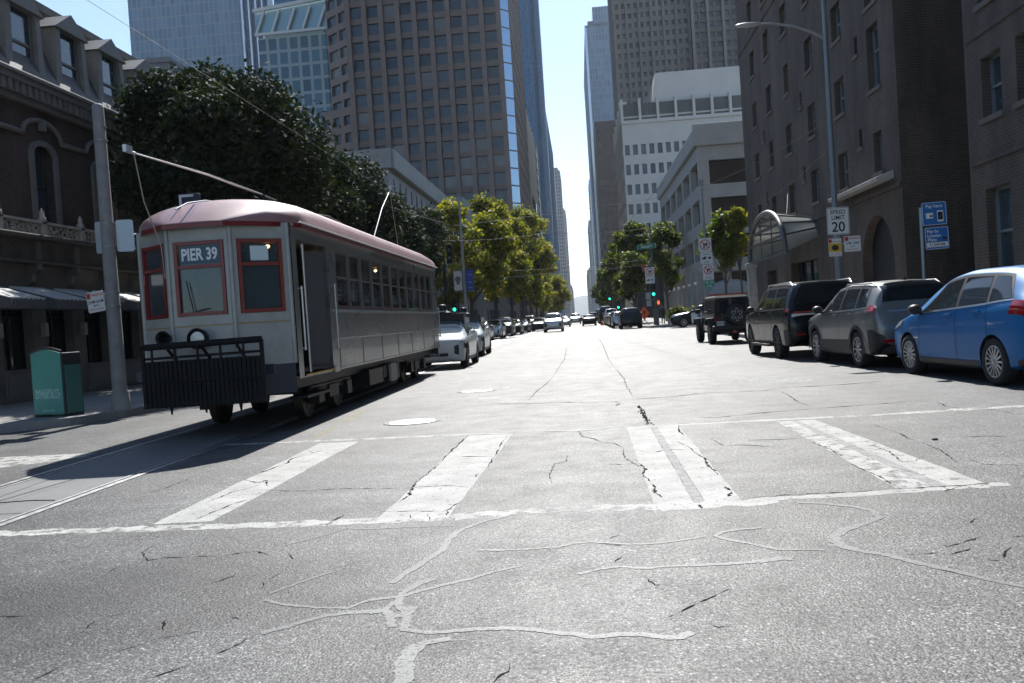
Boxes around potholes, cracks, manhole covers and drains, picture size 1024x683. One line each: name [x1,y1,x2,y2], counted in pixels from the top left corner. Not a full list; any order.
crack [904,518,980,573]
crack [110,547,266,578]
crack [118,617,259,654]
manhole cover [383,418,441,426]
